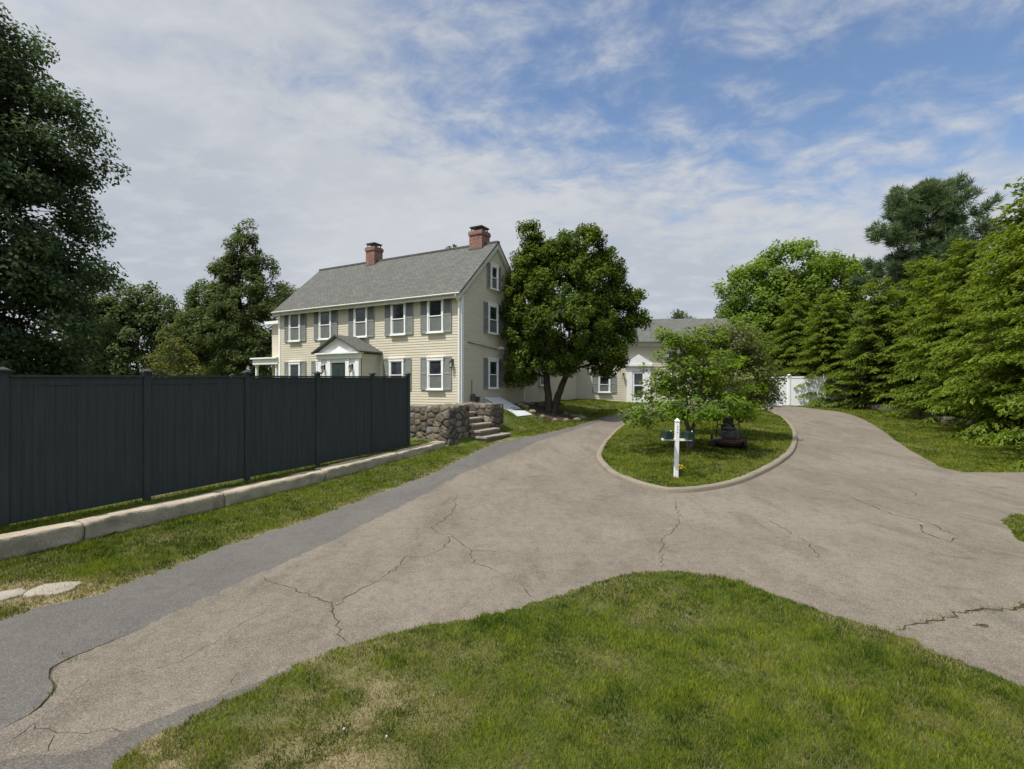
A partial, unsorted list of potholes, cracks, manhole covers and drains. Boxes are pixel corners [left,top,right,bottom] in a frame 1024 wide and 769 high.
crack [896,600,1024,634]
crack [383,495,504,577]
crack [658,498,681,569]
crack [812,481,959,543]
crack [1,577,378,750]
